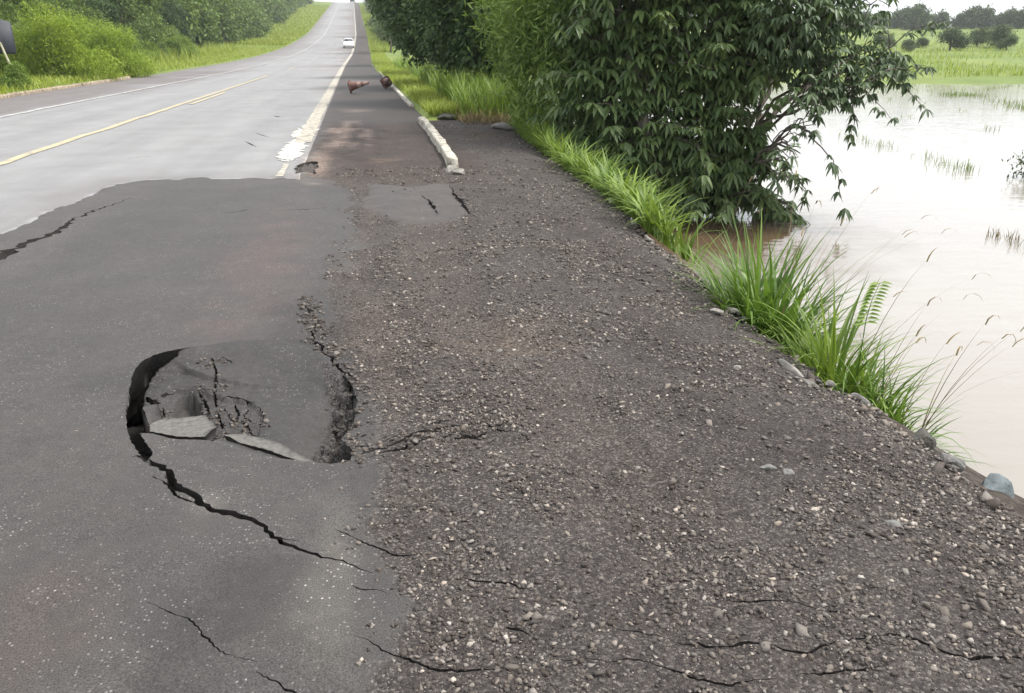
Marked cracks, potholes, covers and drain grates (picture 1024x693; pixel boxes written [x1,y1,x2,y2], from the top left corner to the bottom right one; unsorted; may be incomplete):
crack [422,188,470,214]
crack [566,599,1021,687]
pothole [293,161,320,174]
crack [148,602,297,693]
crack [0,198,130,260]
crack [305,307,356,388]
pothole [125,339,358,466]
crack [354,635,514,673]
crack [133,408,516,593]
